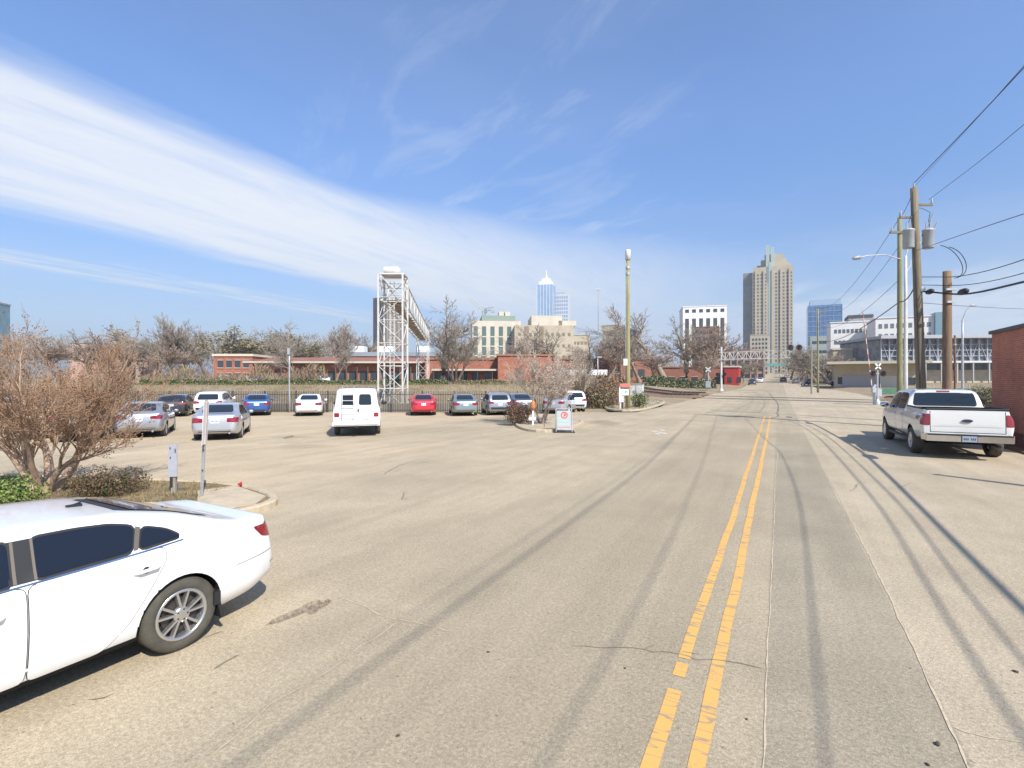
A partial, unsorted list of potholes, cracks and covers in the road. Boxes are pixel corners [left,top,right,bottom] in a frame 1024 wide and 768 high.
crack [203,597,448,762]
pothole [265,599,332,626]
crack [581,644,763,669]
